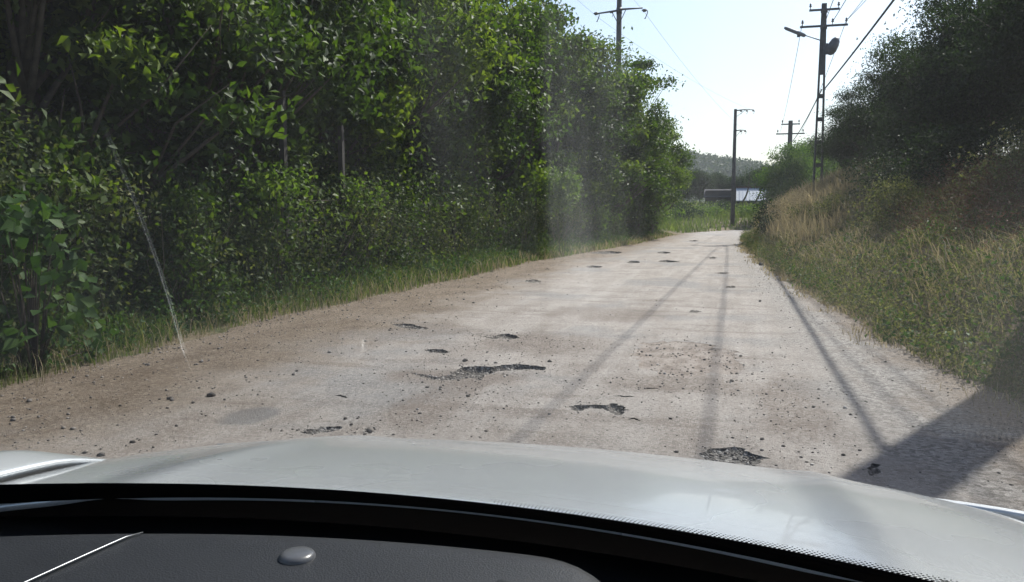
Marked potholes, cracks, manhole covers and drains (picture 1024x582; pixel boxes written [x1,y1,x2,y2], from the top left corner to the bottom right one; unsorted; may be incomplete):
pothole [697,447,770,466]
pothole [867,463,881,477]
pothole [414,364,546,381]
pothole [303,426,342,435]
pothole [570,403,627,415]
